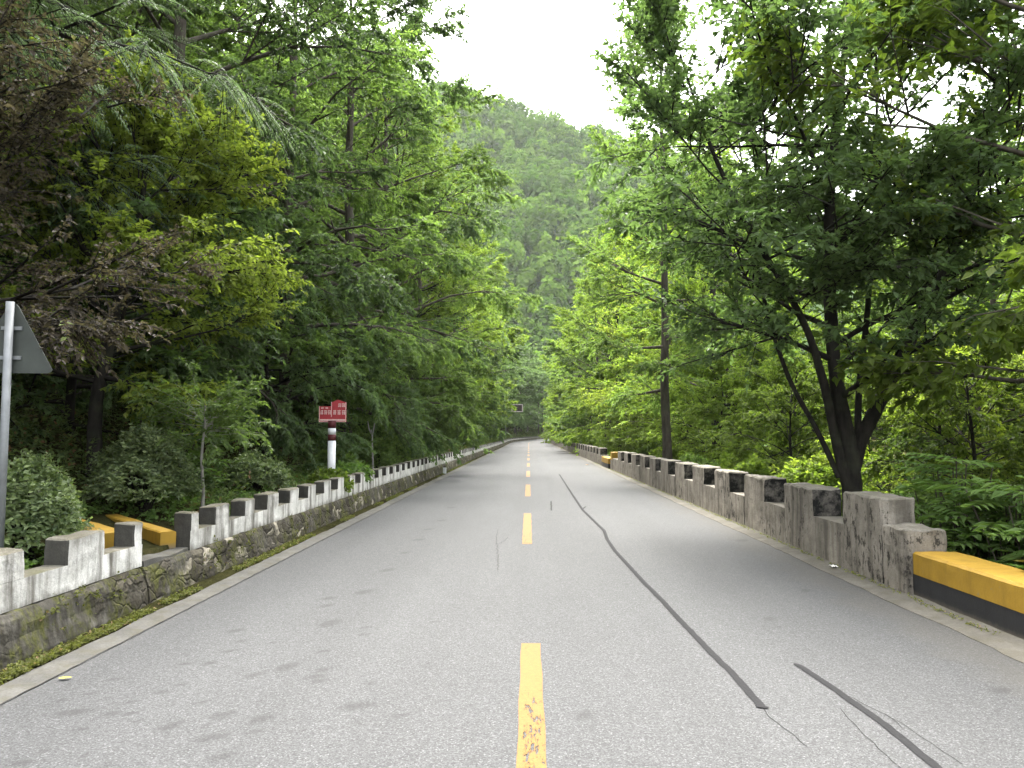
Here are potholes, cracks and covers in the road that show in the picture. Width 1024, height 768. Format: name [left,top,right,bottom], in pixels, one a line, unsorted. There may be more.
crack [840,692,962,768]
